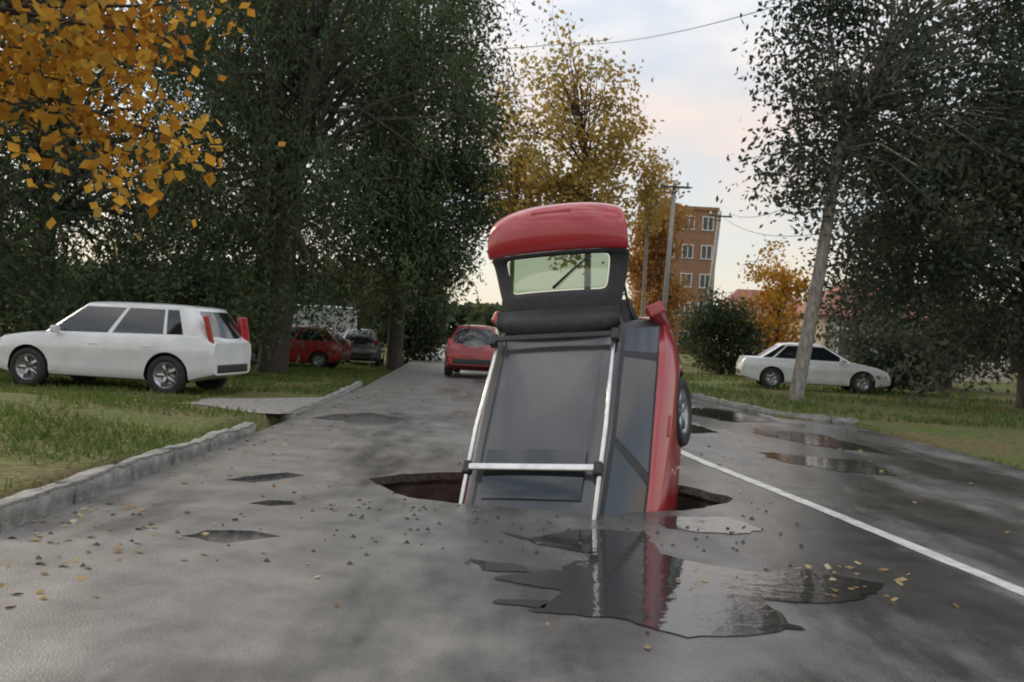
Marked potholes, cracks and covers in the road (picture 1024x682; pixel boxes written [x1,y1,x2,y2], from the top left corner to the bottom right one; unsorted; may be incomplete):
pothole [183,530,282,543]
pothole [314,413,403,424]
pothole [226,473,303,483]
